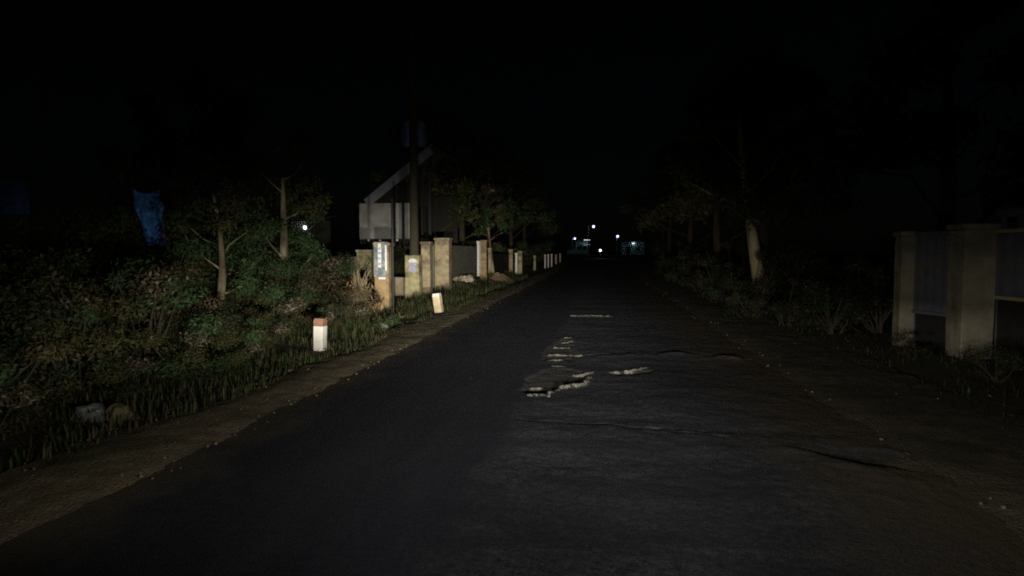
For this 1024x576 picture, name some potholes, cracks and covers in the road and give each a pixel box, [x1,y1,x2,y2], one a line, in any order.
pothole [605,367,655,376]
pothole [539,337,584,367]
pothole [520,367,595,397]
crack [523,419,726,438]
